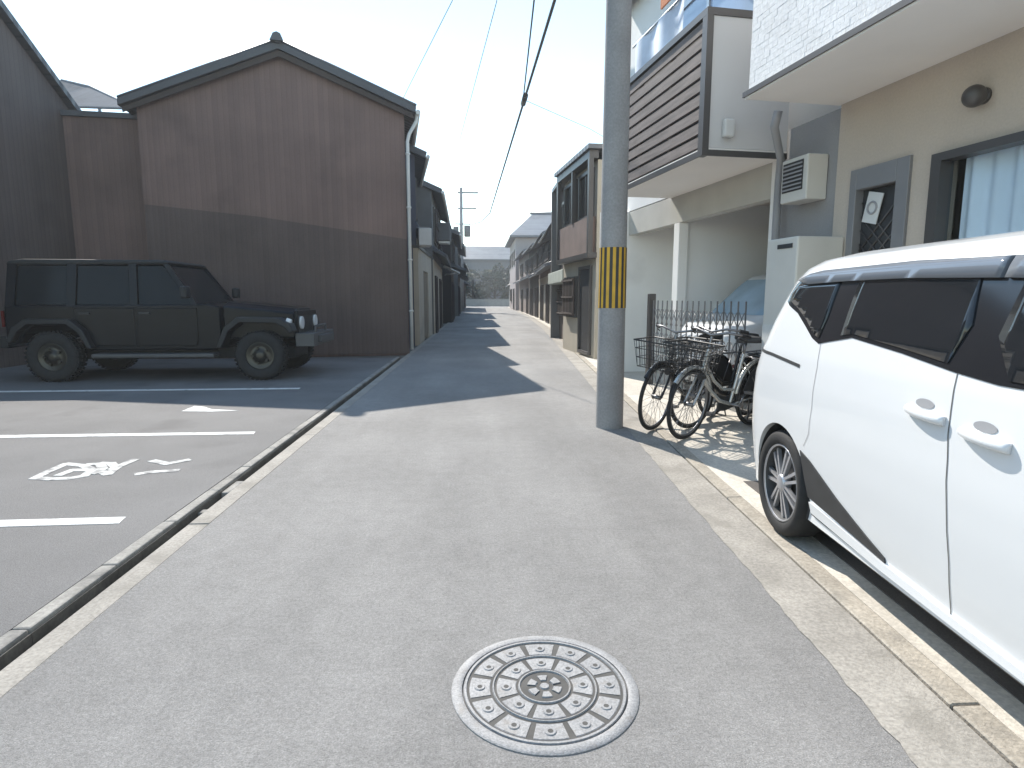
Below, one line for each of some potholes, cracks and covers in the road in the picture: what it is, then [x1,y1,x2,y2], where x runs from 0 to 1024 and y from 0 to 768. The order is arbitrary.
manhole cover [451,636,639,757]
